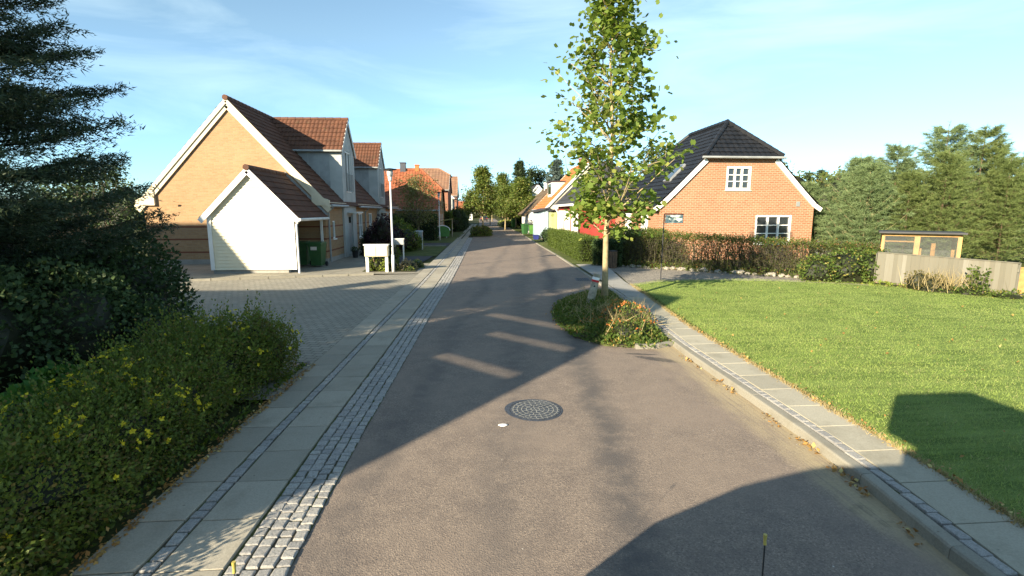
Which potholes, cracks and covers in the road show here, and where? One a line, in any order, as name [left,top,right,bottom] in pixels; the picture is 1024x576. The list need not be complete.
manhole cover [504,399,563,421]
